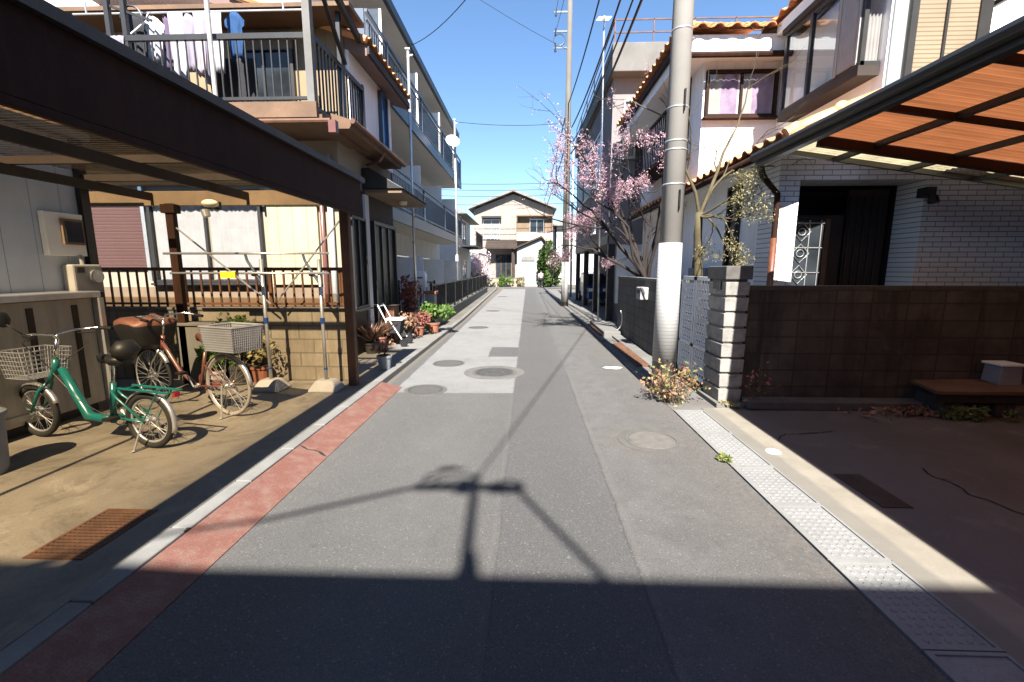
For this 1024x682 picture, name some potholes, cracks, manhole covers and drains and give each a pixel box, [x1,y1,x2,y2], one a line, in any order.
drain grate [22,508,158,560]
manhole cover [404,384,447,396]
manhole cover [464,366,524,380]
manhole cover [617,428,688,454]
crack [920,467,1024,514]
